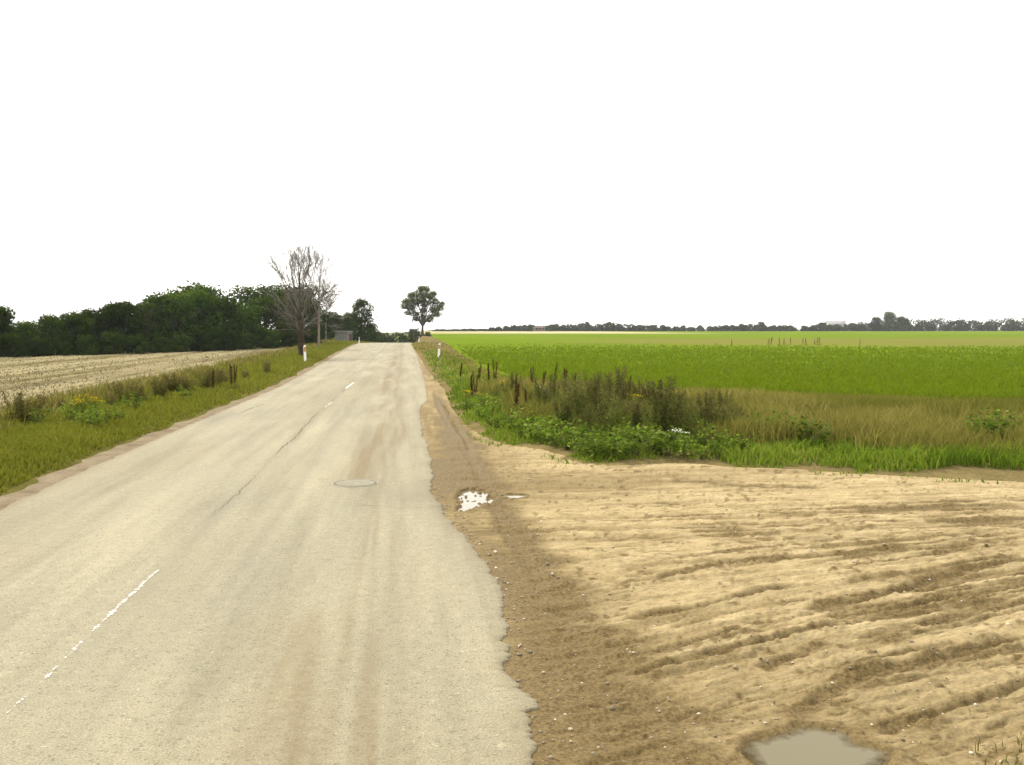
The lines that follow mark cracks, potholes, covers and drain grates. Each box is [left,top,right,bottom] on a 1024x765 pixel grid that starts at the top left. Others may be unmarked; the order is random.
manhole cover [331,479,379,487]
crack [218,372,363,510]
